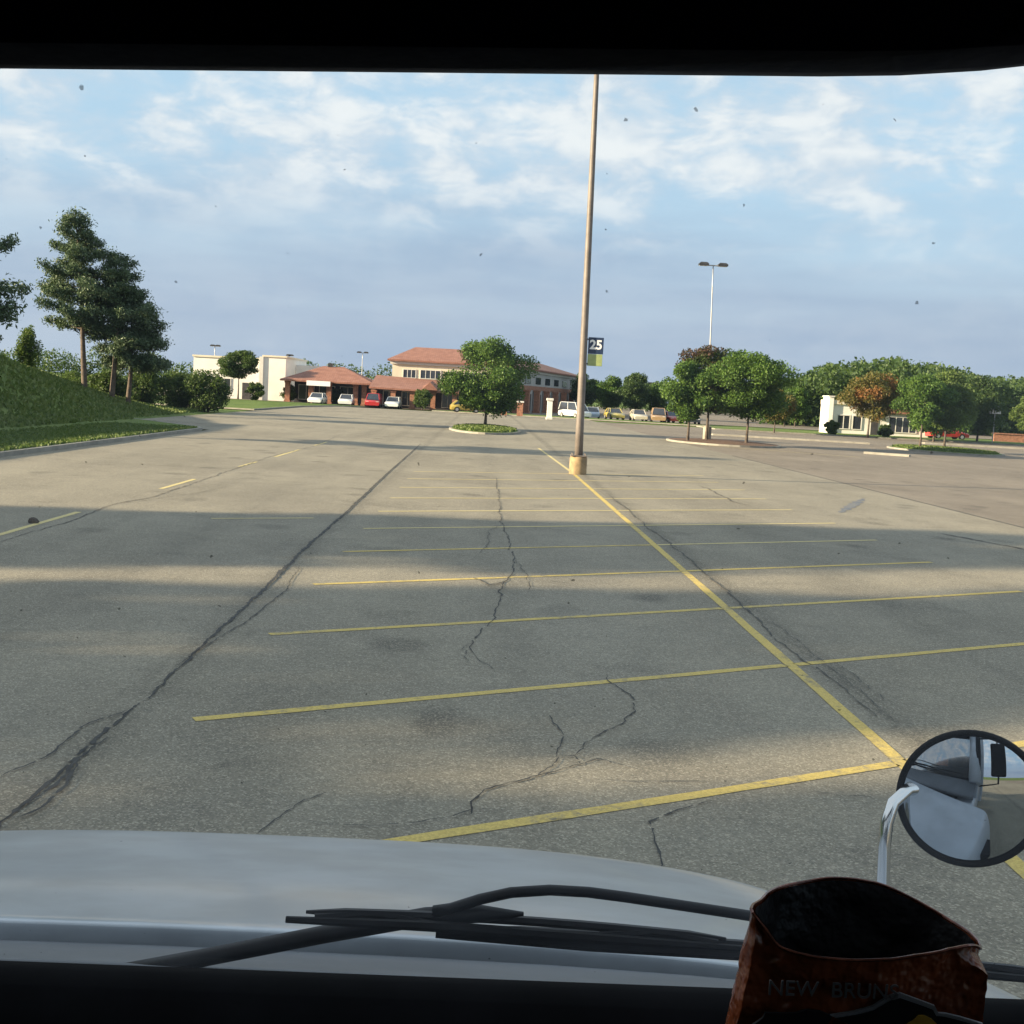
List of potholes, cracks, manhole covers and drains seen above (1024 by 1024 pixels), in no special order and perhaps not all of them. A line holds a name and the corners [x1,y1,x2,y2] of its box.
crack [555,800,711,866]
crack [258,792,325,833]
crack [442,478,531,669]
crack [296,675,636,826]
